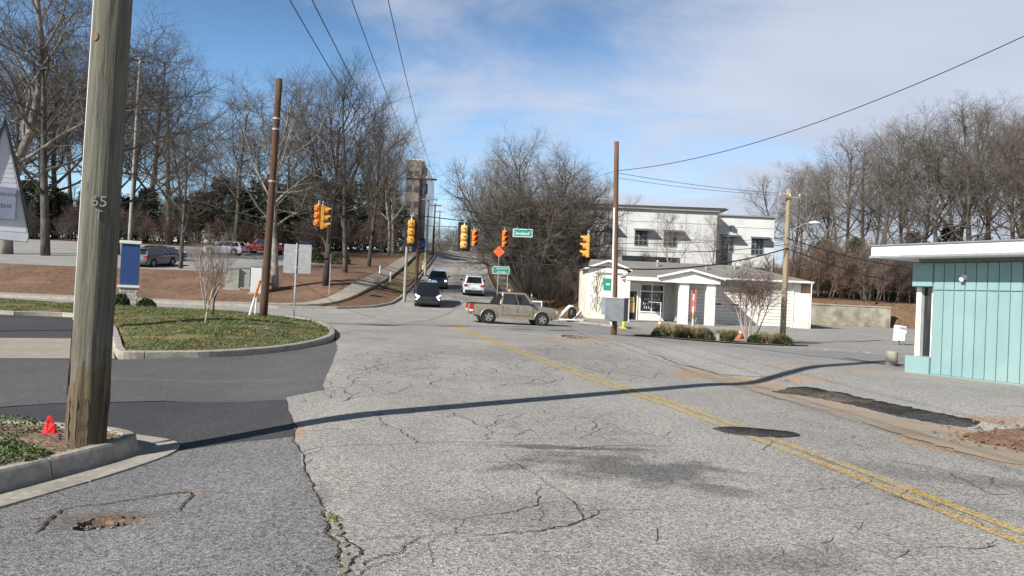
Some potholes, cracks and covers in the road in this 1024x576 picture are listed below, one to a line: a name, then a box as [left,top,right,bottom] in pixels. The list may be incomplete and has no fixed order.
crack [302,329,563,403]
pothole [72,516,146,531]
crack [301,411,673,575]
